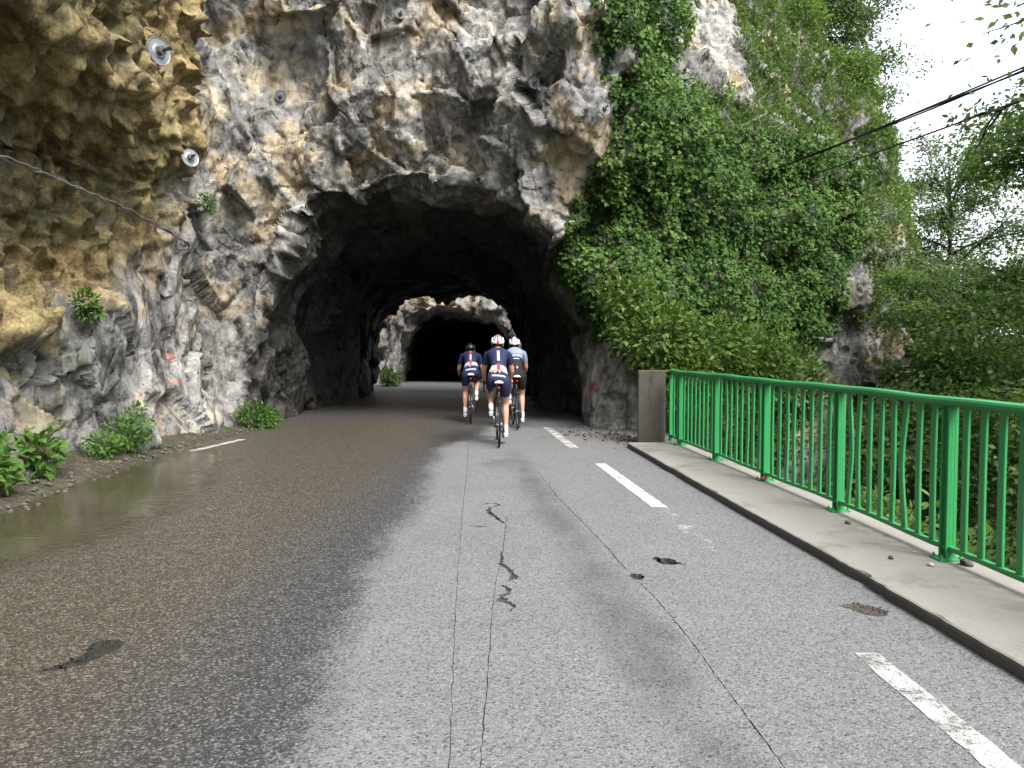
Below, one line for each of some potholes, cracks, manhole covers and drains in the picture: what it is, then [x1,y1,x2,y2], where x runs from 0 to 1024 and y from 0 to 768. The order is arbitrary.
pothole [838,602,889,617]
pothole [39,639,124,672]
pothole [652,557,686,565]
crack [448,446,519,768]
